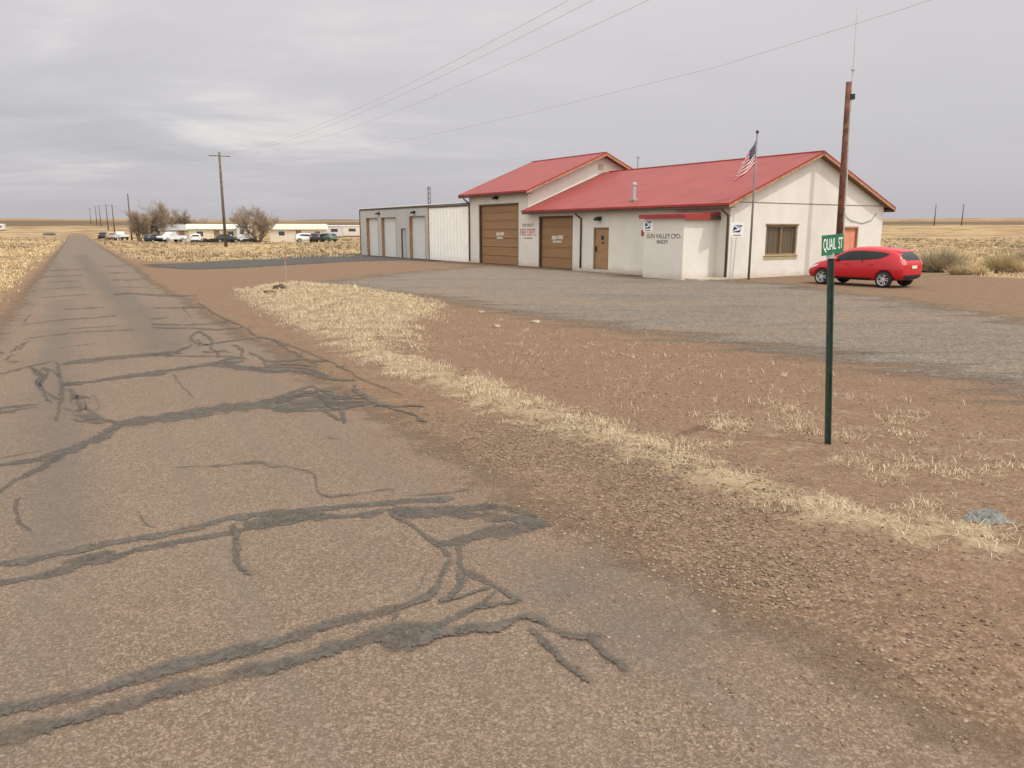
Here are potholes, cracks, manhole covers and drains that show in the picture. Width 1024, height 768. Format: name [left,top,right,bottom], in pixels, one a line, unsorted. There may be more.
crack [0,341,29,363]
crack [153,302,400,394]
